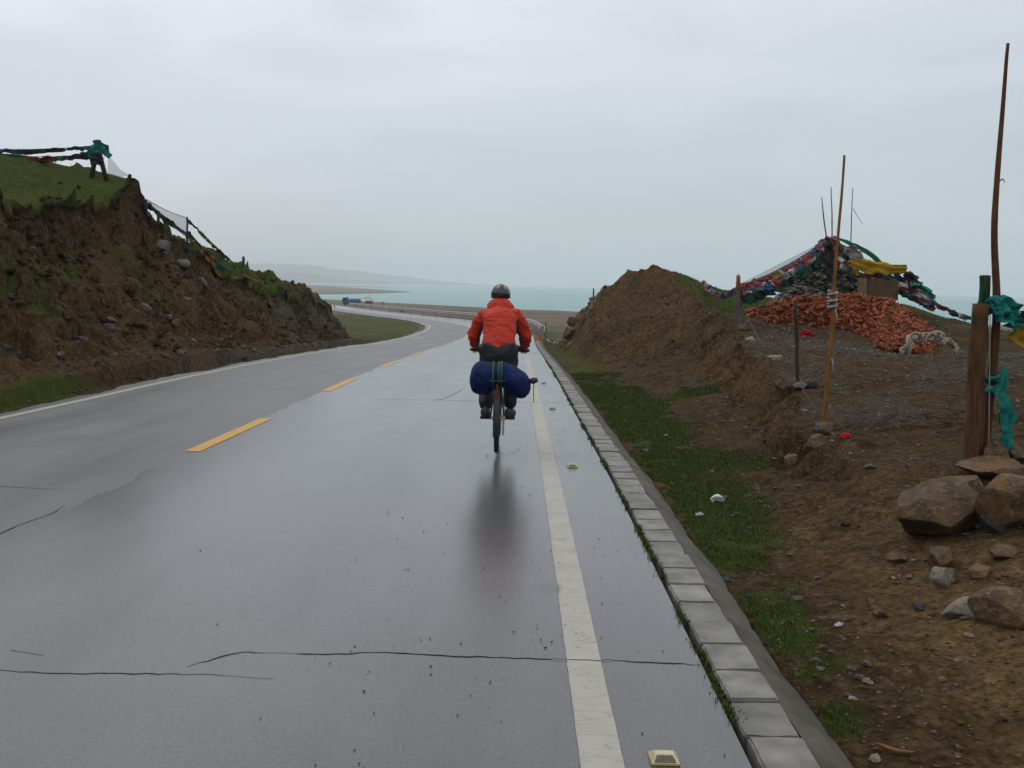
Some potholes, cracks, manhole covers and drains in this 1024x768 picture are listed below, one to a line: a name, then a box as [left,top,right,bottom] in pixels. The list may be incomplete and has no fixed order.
crack [5,650,692,679]
